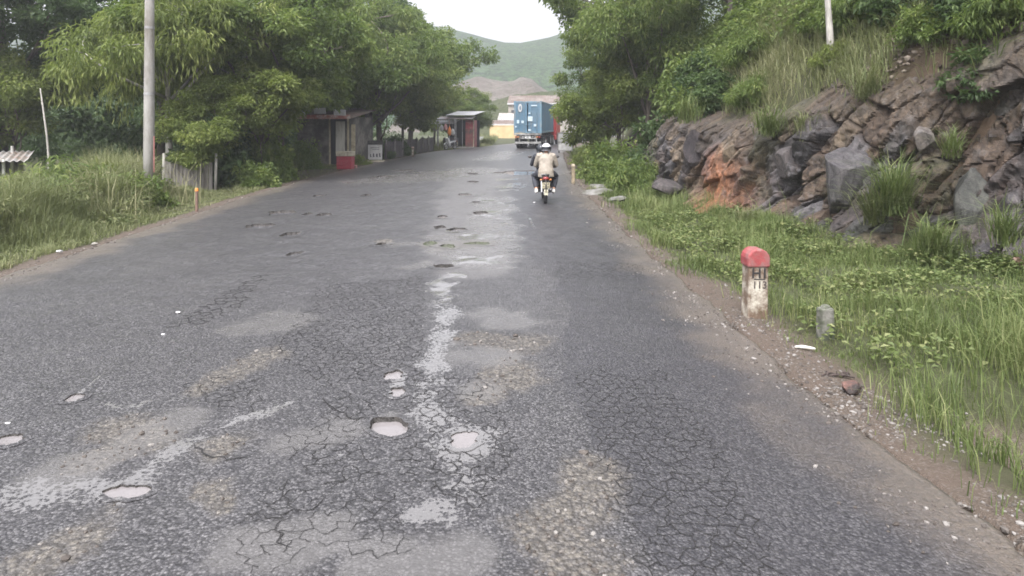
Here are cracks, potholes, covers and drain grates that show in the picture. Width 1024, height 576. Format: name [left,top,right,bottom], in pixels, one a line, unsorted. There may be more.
pothole [377,367,409,382]
crack [194,443,255,460]
pothole [362,414,417,440]
pothole [443,428,485,452]
pothole [383,384,412,399]
pothole [0,430,34,449]
pothole [93,480,161,502]
crack [395,375,520,508]
crack [570,365,784,576]
crack [183,377,267,414]
pothole [56,390,93,404]
pothole [239,222,282,230]
